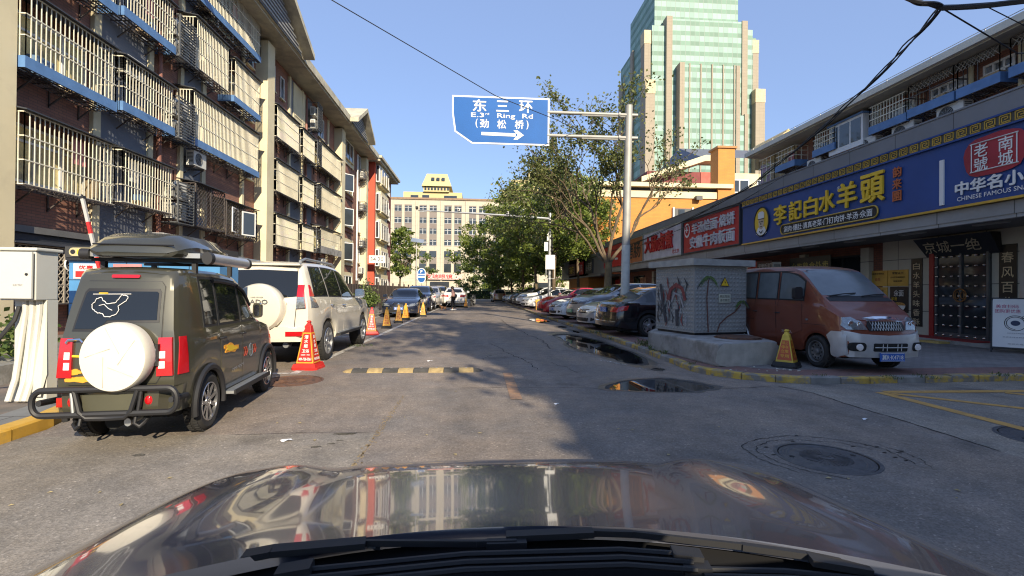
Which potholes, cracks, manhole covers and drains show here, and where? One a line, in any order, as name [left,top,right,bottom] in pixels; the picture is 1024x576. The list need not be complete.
manhole cover [992,426,1024,442]
crack [483,308,578,388]
manhole cover [269,375,324,387]
manhole cover [773,443,885,476]
